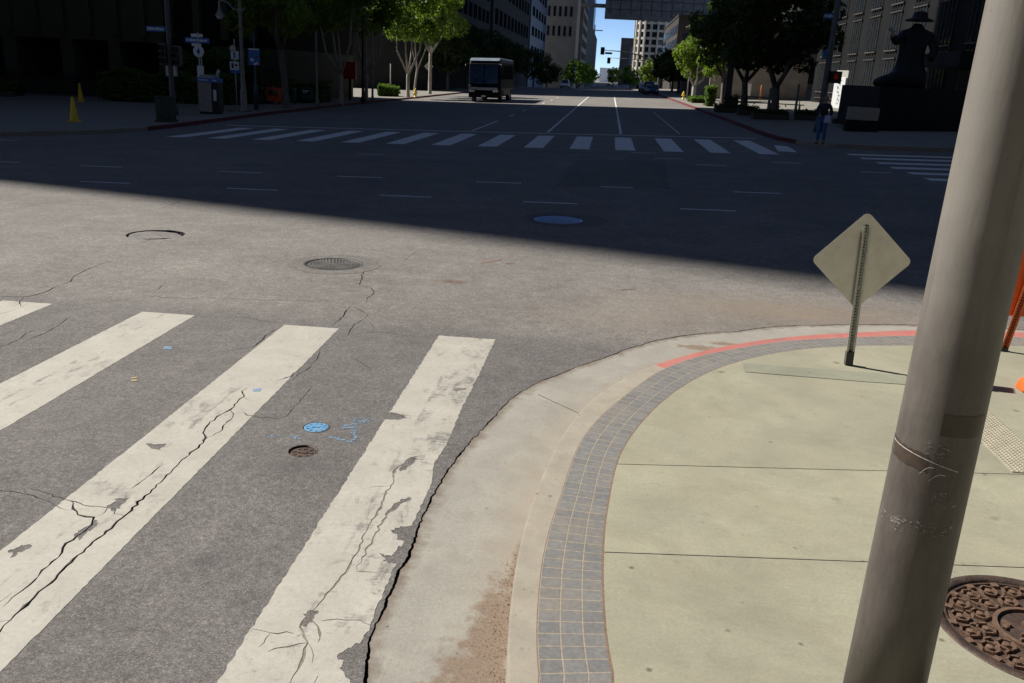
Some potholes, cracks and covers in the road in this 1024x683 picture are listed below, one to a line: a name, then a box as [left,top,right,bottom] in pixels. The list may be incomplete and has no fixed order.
crack [115,272,405,338]
manhole cover [531,215,585,224]
crack [0,349,322,632]
manhole cover [302,422,330,433]
manhole cover [287,445,318,457]
manhole cover [940,575,1024,680]
manhole cover [304,258,363,270]
crack [0,261,109,306]
